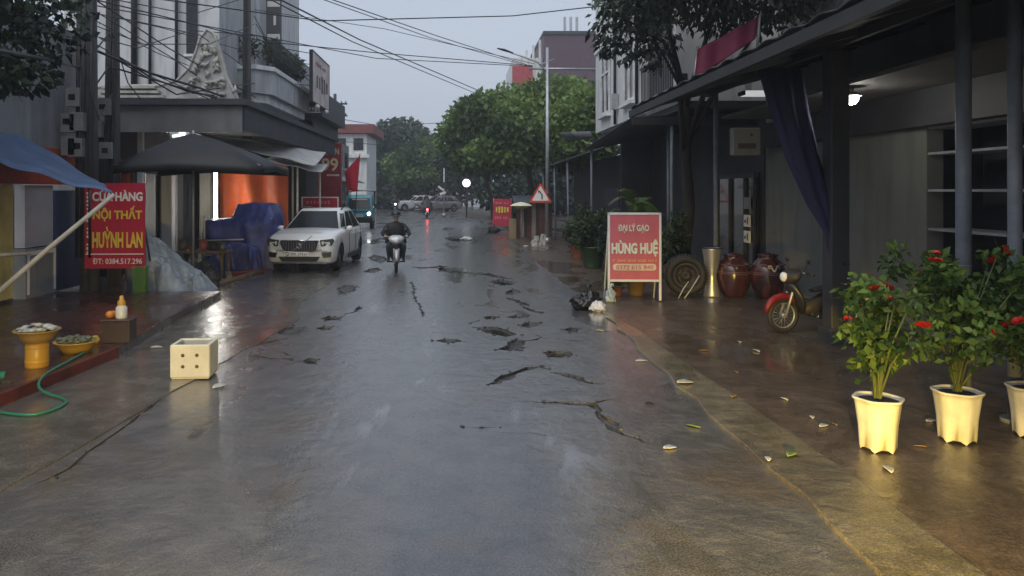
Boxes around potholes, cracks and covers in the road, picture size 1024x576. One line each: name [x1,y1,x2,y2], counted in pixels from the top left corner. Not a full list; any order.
pothole [473,326,524,337]
pothole [336,284,357,295]
pothole [494,338,526,351]
crack [409,248,513,317]
crack [506,297,544,314]
pothole [543,350,578,358]
crack [486,365,644,442]
